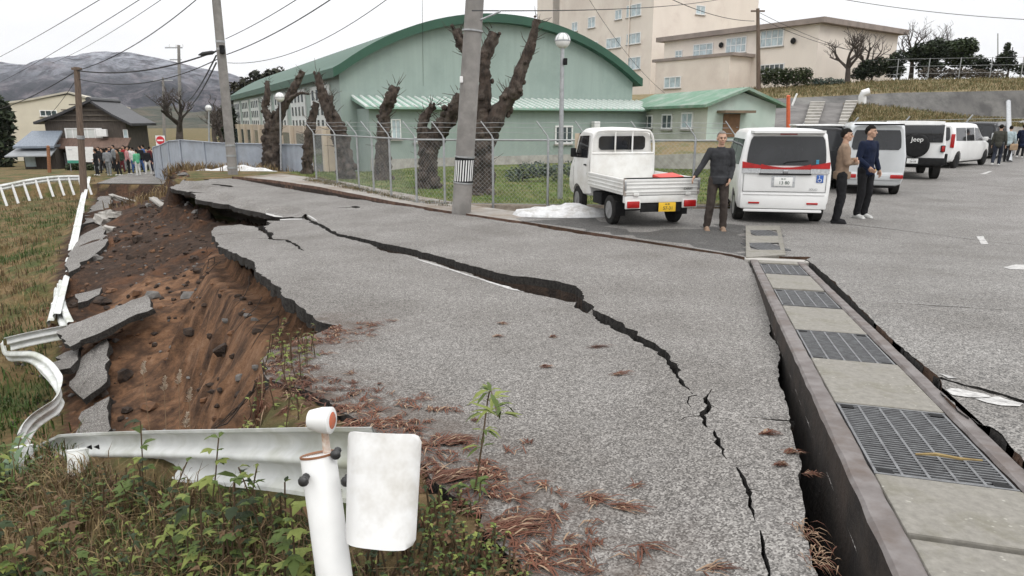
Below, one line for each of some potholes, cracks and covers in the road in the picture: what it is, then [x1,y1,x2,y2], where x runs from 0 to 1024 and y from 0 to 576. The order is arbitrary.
drain grate [796,329,896,365]
drain grate [760,264,809,276]
drain grate [741,243,791,251]
crack [184,176,771,576]
drain grate [774,289,841,309]
drain grate [836,402,1021,492]
crack [805,260,1024,451]
